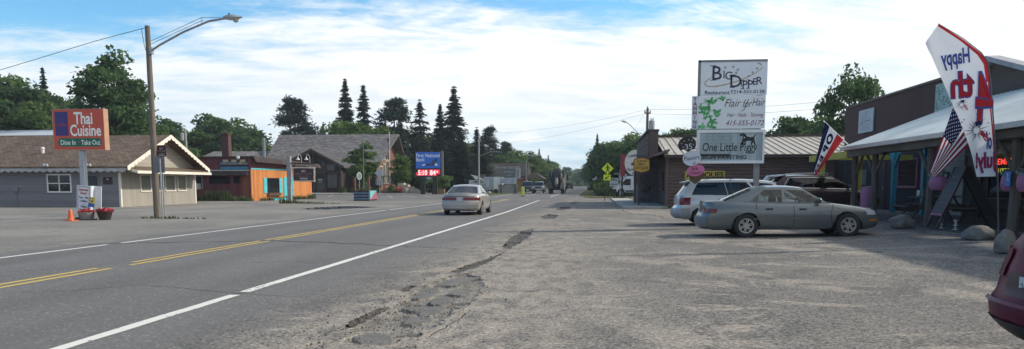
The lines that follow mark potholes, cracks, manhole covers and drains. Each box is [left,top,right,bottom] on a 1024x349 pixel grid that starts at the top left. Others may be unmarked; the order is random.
pothole [450,251,506,273]
pothole [501,229,534,249]
pothole [330,273,486,346]
